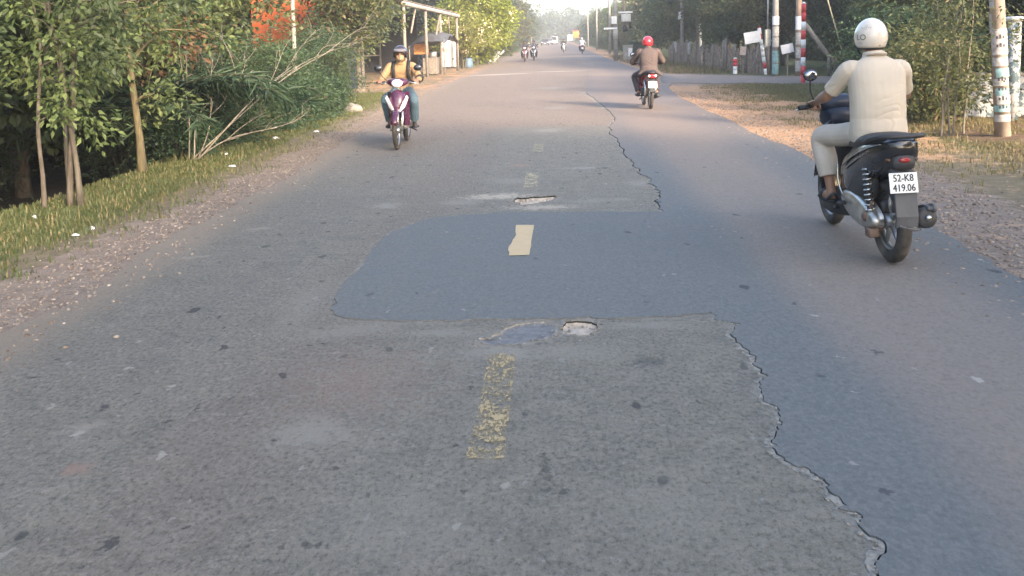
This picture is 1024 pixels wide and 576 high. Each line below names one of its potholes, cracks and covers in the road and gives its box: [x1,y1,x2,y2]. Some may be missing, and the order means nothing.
crack [586,93,660,210]
crack [711,314,886,576]
pothole [506,194,560,206]
pothole [559,318,603,337]
pothole [472,321,561,347]
